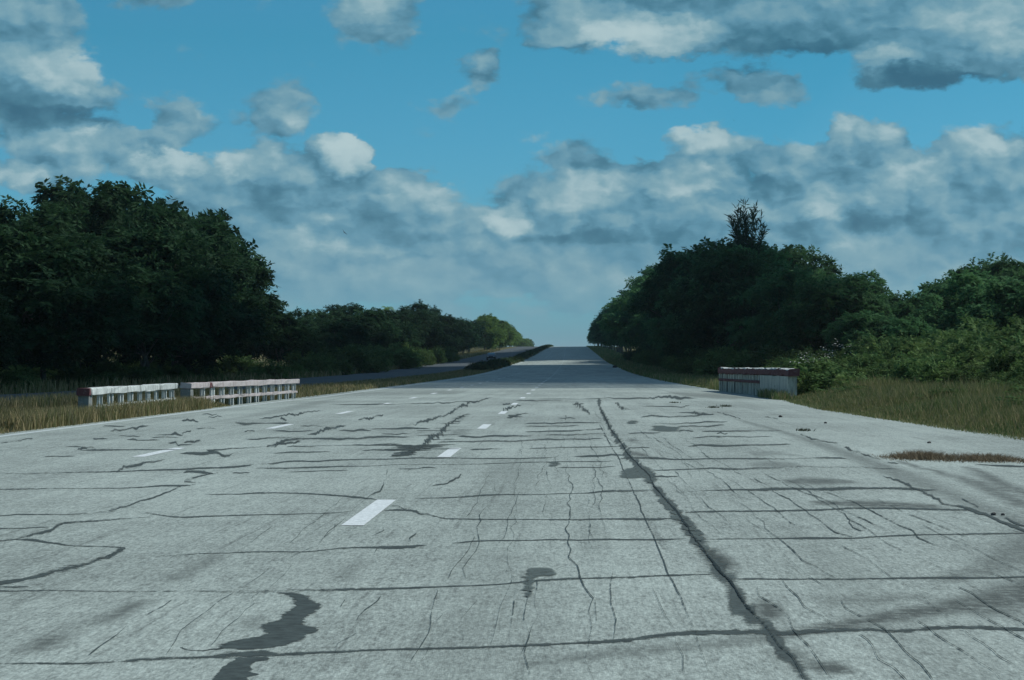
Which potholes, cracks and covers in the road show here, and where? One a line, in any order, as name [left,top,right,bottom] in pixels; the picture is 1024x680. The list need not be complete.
crack [0,395,1024,680]
